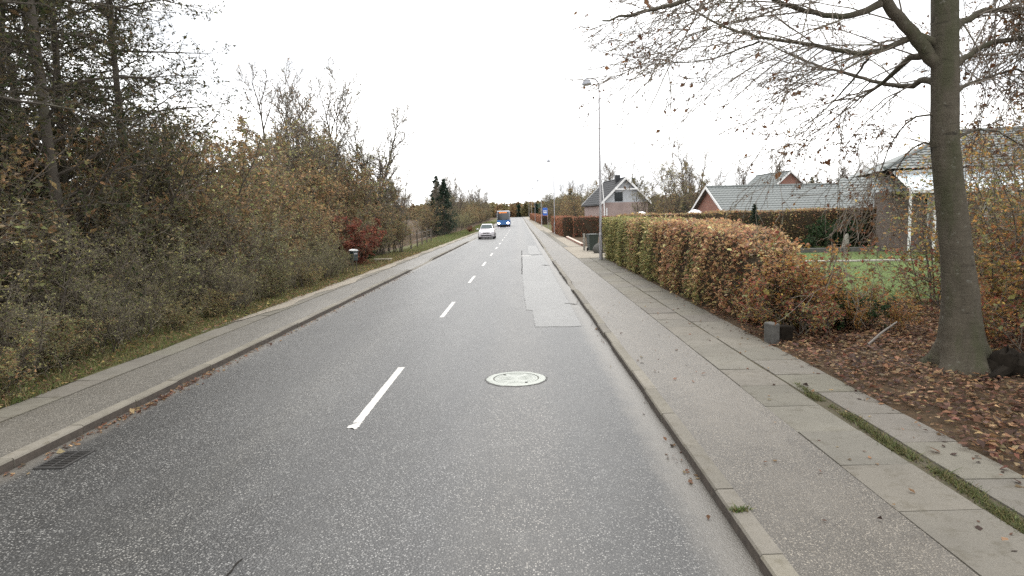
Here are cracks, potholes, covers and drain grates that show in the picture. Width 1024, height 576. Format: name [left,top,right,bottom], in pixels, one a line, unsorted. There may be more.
manhole cover [485,371,548,387]
drain grate [32,450,95,470]
